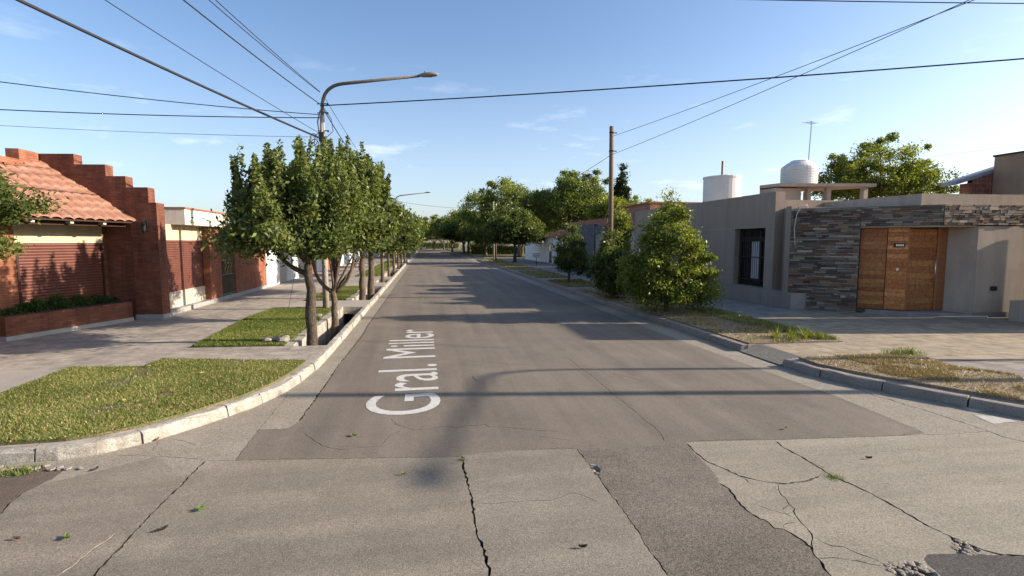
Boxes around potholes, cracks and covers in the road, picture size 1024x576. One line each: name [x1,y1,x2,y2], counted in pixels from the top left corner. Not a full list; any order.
crack [687,444,883,576]
pothole [884,561,938,576]
pothole [950,537,981,556]
